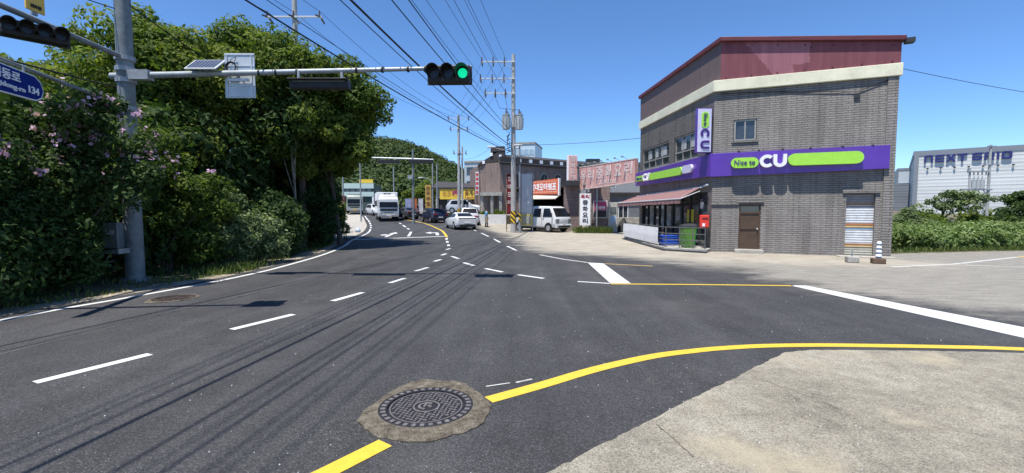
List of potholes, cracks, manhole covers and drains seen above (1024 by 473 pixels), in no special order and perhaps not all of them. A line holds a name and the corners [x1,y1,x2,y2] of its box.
crack [657,425,694,458]
manhole cover [143,294,201,303]
manhole cover [356,379,491,443]
